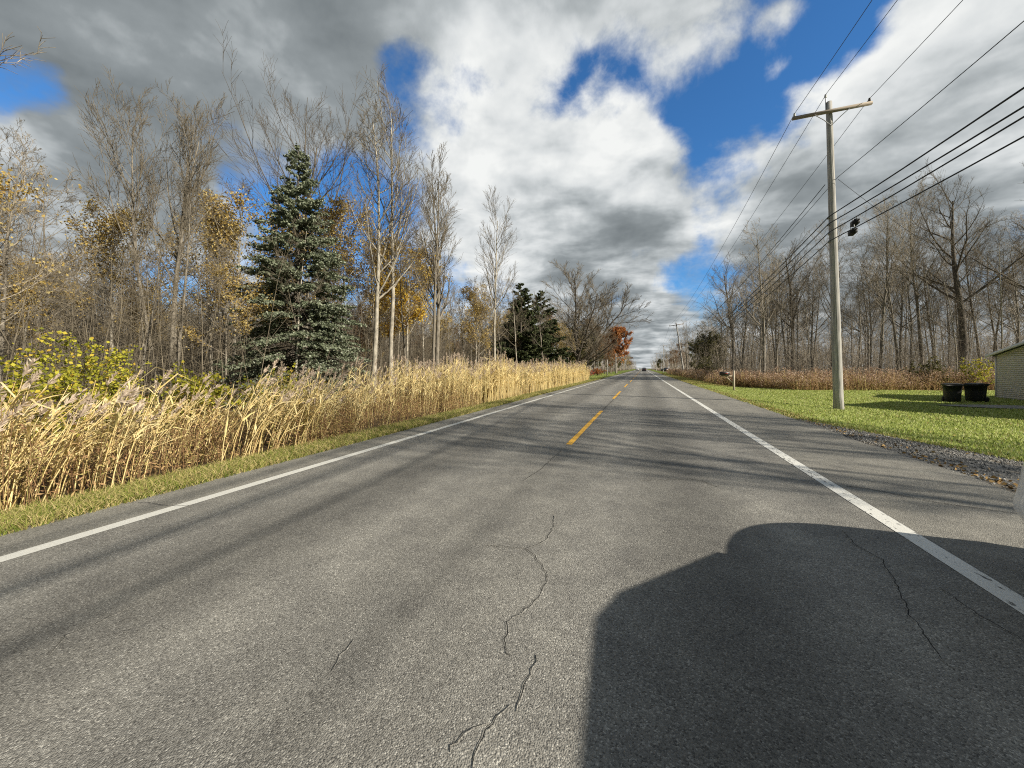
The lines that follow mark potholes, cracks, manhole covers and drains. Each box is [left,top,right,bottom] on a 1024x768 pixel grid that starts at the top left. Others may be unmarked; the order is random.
crack [843,531,1024,670]
crack [449,517,555,768]
